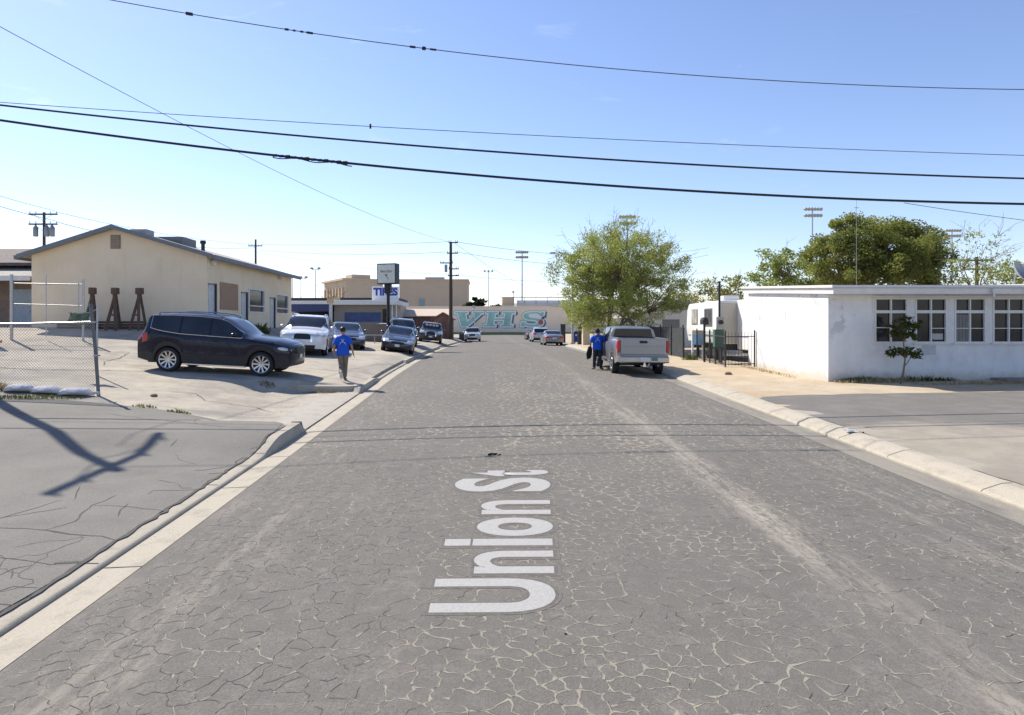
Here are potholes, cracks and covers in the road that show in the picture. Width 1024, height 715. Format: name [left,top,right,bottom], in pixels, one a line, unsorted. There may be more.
crack [0,444,444,715]
crack [302,351,1024,715]
